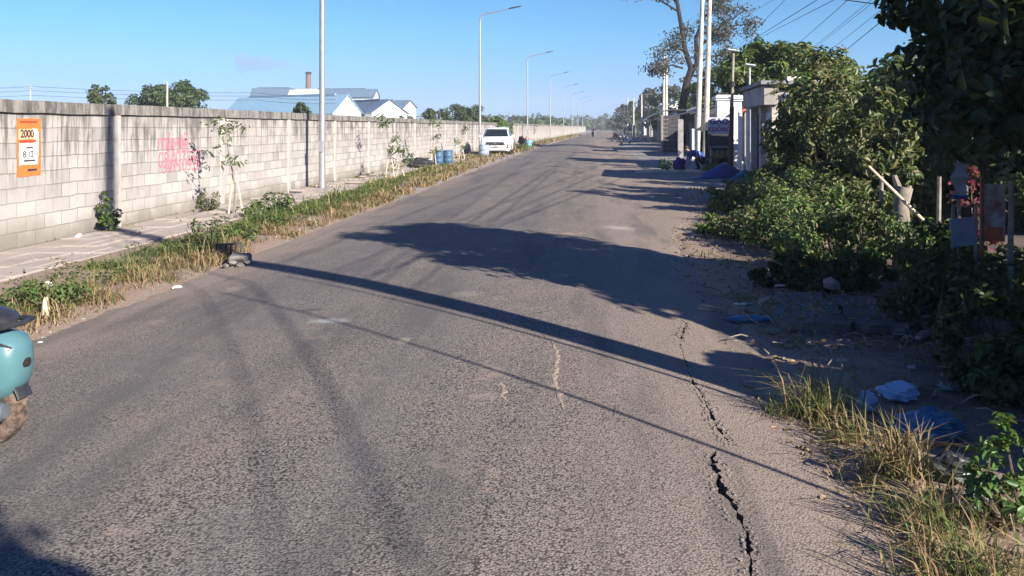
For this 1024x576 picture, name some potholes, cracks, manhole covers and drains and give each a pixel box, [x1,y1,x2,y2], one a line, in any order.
crack [496,381,508,401]
crack [672,320,766,576]
crack [550,340,564,411]
